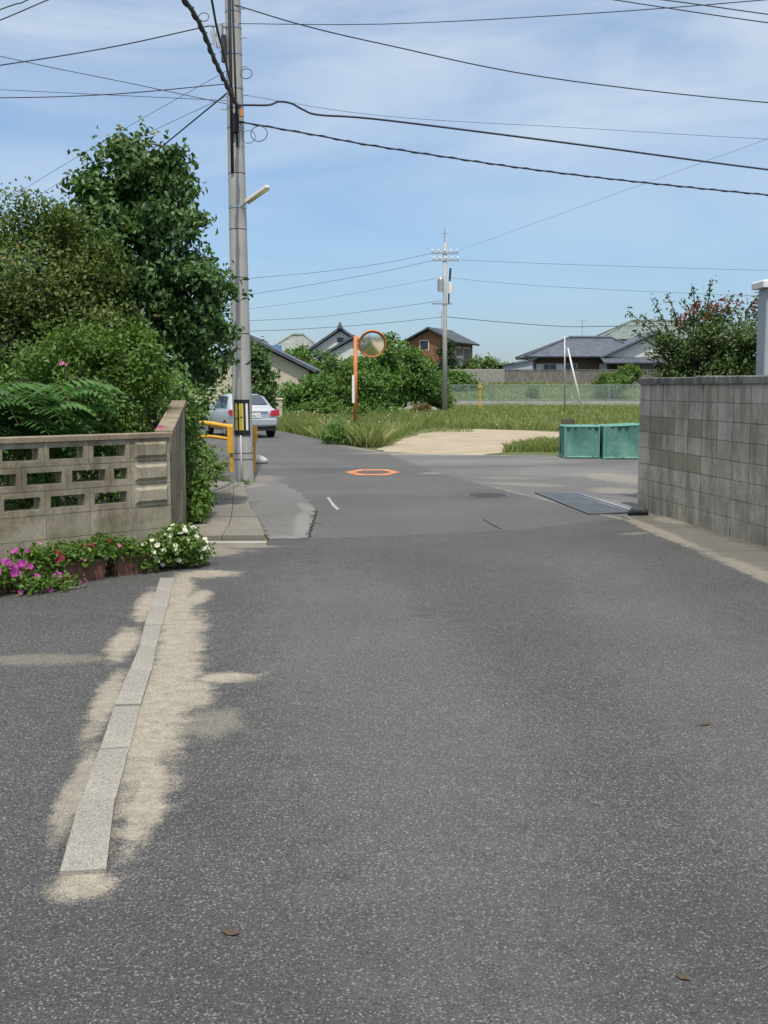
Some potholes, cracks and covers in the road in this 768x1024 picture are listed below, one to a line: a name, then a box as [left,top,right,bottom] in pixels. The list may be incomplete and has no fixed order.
drain grate [551,498,607,506]
drain grate [569,505,628,514]
